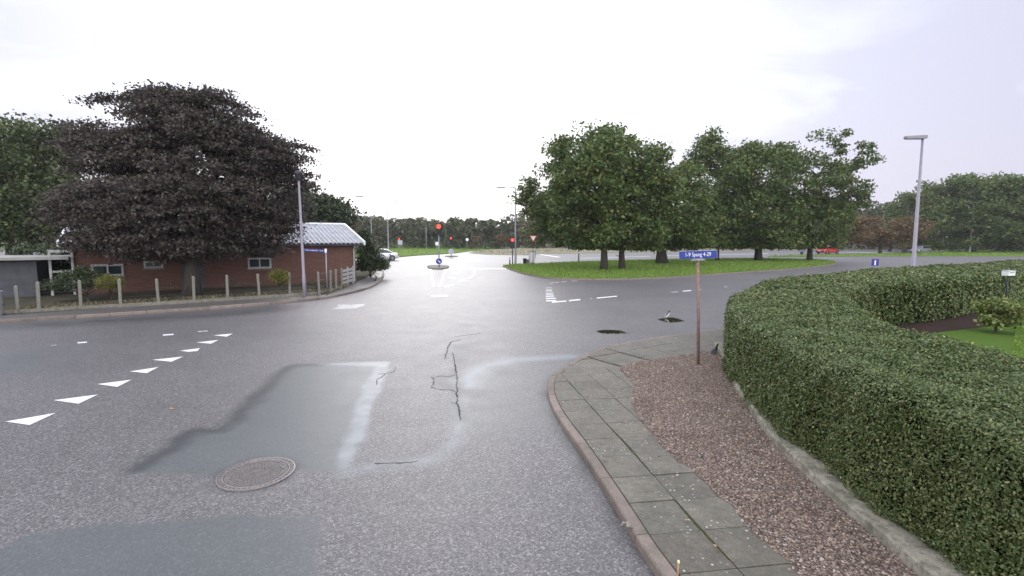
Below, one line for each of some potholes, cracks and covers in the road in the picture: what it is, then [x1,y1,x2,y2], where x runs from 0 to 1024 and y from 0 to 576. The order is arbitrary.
manhole cover [215,457,296,491]
crack [431,333,478,419]
